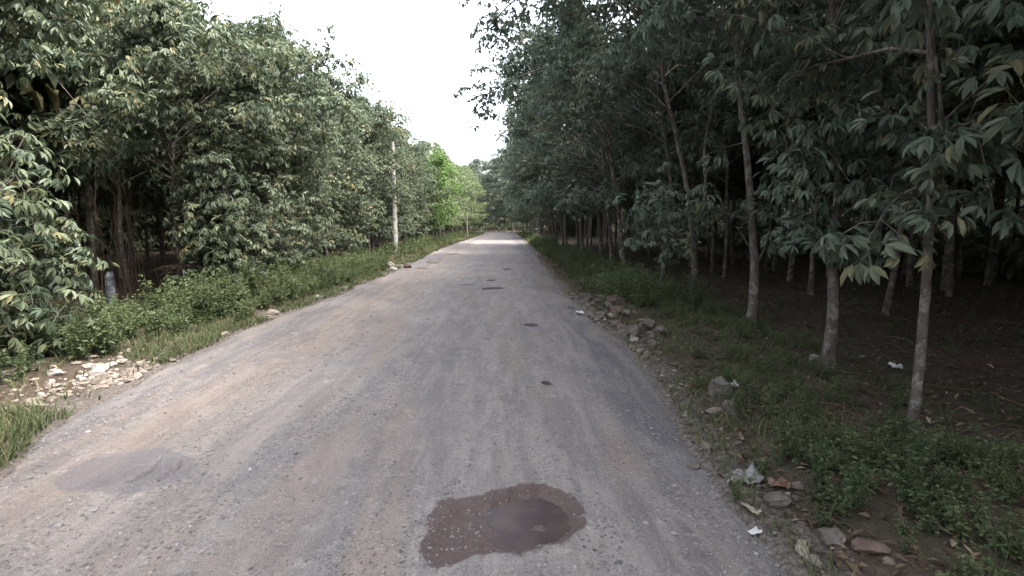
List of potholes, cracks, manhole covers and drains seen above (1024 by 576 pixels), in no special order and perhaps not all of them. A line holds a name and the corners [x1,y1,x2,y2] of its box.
pothole [405,479,601,576]
